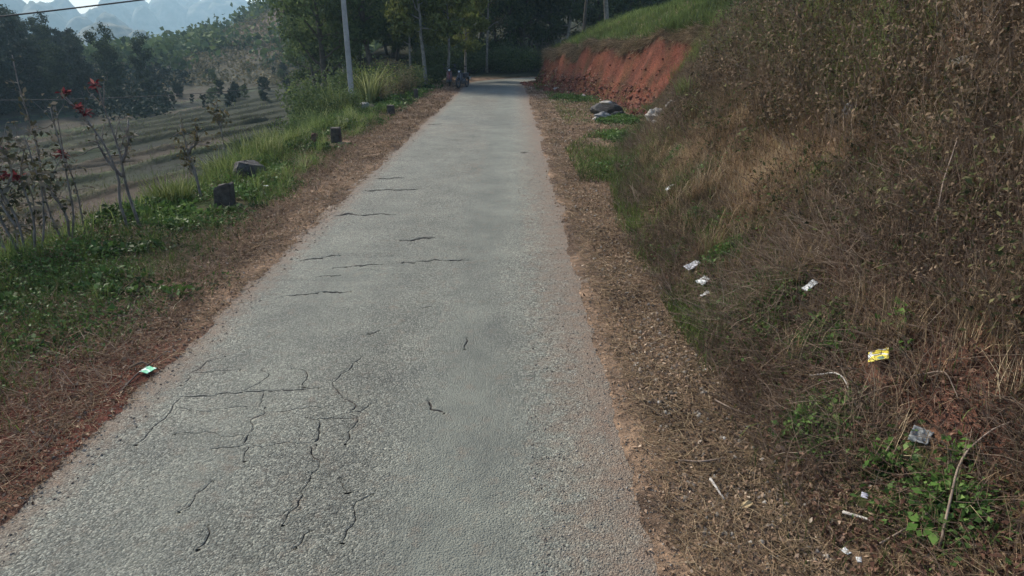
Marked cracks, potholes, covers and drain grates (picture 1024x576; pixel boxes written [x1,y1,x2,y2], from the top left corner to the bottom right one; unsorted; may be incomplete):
crack [426,400,446,414]
crack [462,338,471,349]
crack [363,177,423,192]
crack [135,356,374,551]
crack [281,255,382,298]
crack [402,237,469,264]
